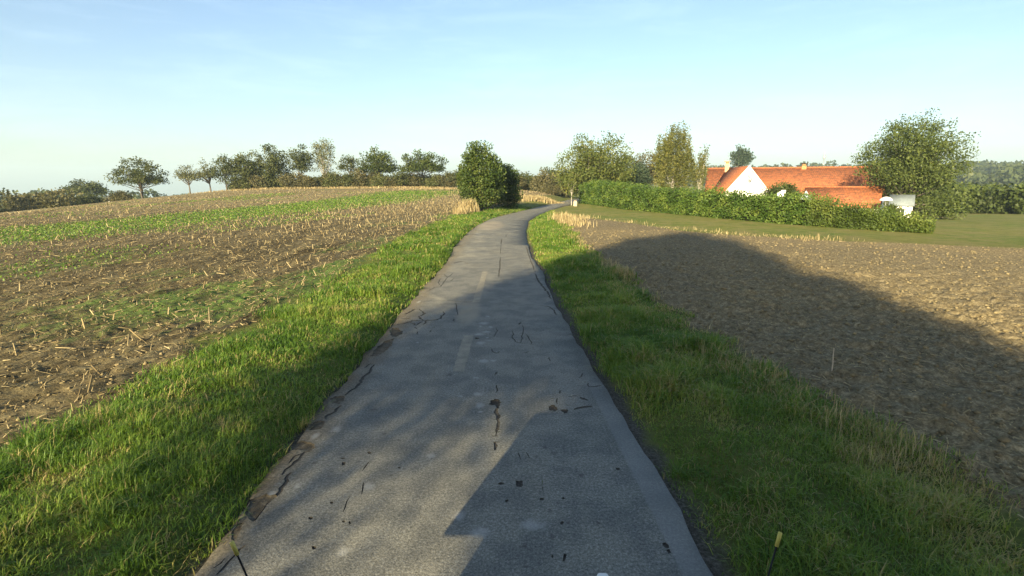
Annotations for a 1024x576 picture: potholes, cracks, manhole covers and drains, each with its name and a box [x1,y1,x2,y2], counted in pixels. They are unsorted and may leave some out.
crack [526,247,557,315]
crack [402,305,458,334]
crack [494,373,533,450]
crack [255,364,374,521]
